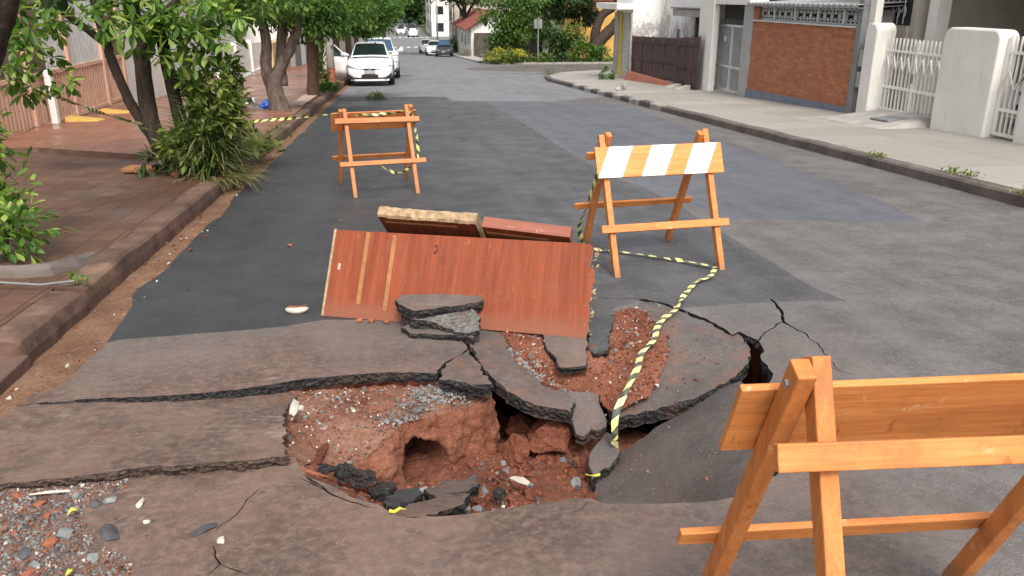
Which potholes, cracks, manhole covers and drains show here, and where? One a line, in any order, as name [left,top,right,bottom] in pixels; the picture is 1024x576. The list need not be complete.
crack [755,299,853,375]
crack [301,475,373,508]
crack [211,491,257,575]
pothole [18,299,773,547]
